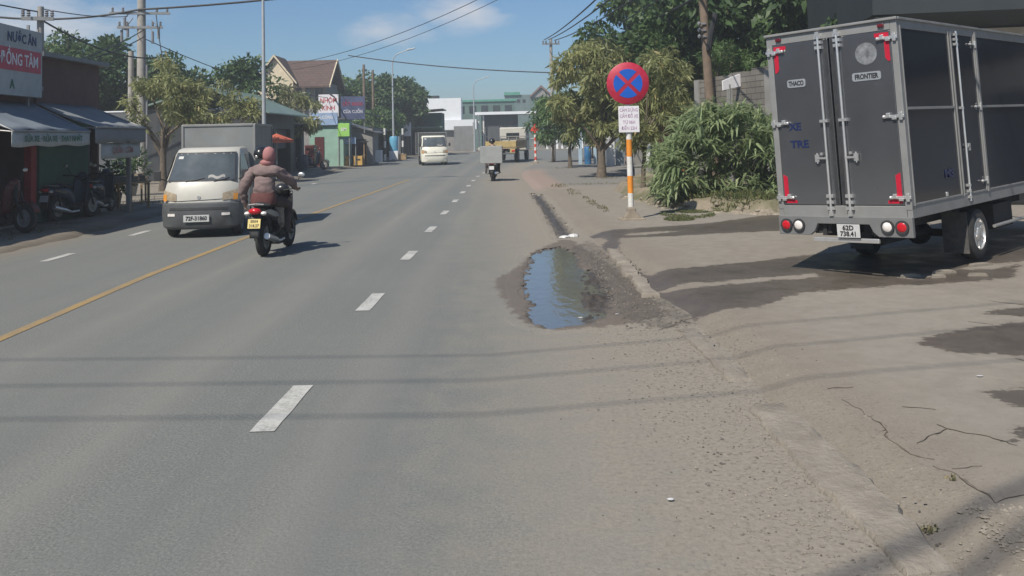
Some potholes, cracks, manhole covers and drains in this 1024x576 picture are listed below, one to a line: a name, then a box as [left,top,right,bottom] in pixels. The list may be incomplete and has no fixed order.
crack [828,387,1024,503]
pothole [503,244,633,334]
